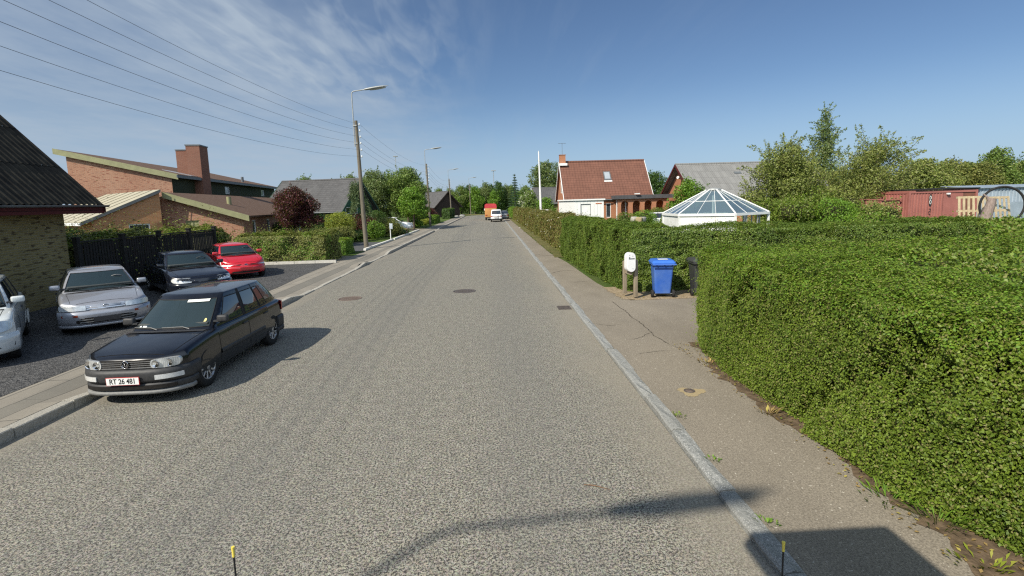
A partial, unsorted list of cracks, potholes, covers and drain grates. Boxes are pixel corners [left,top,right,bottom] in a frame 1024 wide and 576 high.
utility cover [677,388,706,397]
